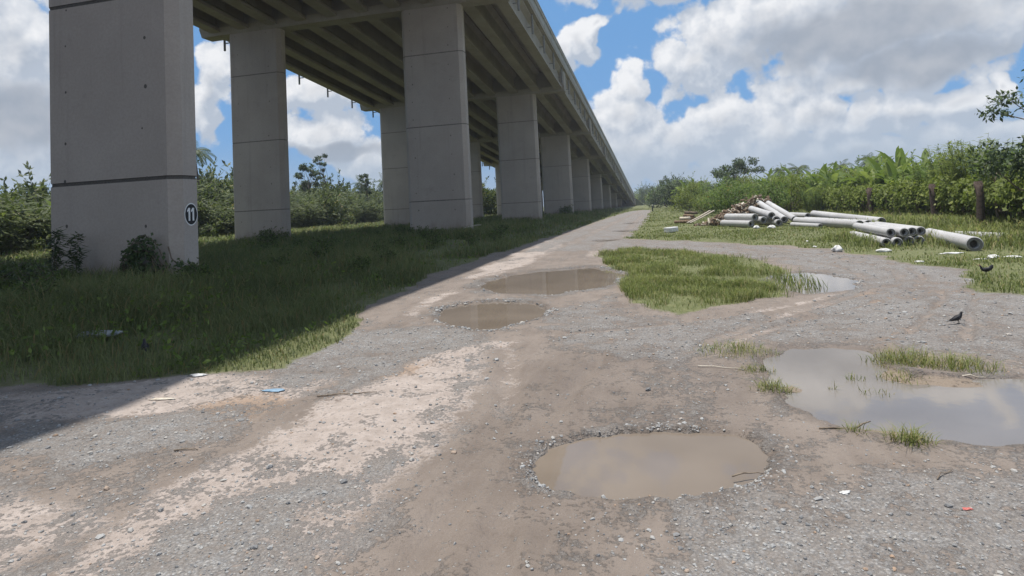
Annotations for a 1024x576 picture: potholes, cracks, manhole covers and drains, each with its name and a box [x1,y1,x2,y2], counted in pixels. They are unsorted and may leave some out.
pothole [501,420,798,507]
pothole [757,270,869,297]
pothole [425,298,560,334]
pothole [741,338,1024,459]
pothole [461,264,629,298]
